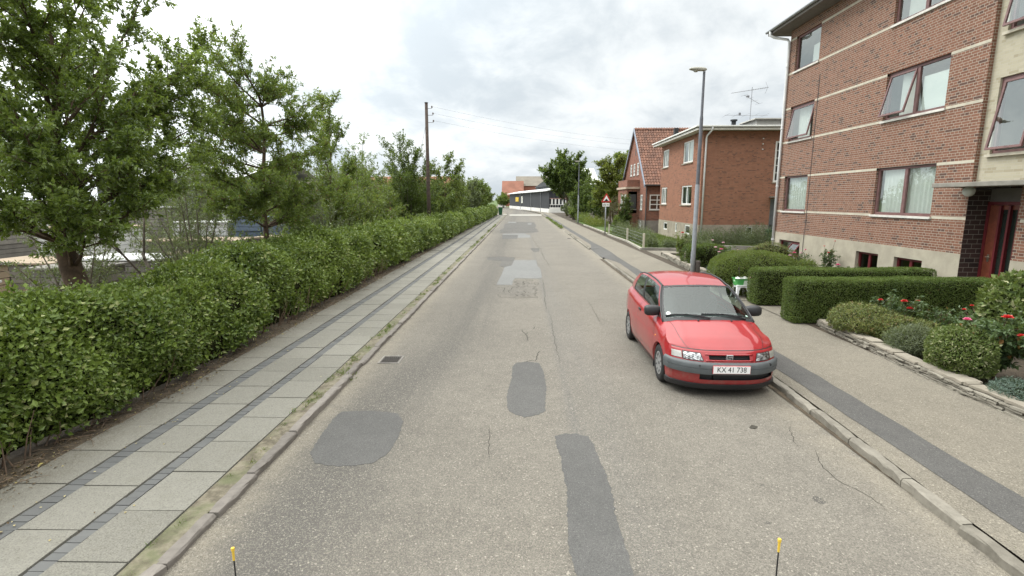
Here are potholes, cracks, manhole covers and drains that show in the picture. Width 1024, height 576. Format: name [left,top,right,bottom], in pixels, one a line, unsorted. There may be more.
drain grate [377,356,404,364]
